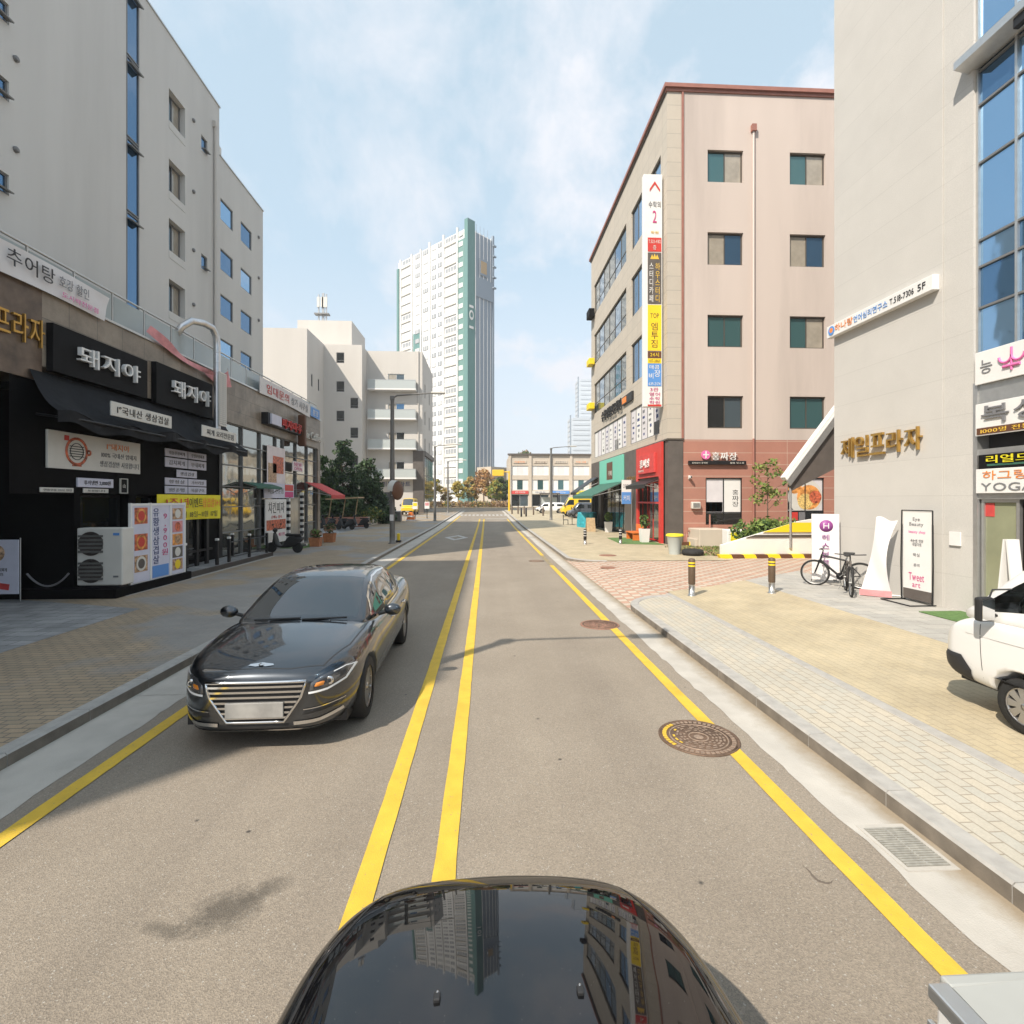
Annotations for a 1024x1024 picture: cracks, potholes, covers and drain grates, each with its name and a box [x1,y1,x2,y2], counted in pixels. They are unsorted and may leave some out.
manhole cover [580,620,620,630]
drain grate [856,824,961,872]
manhole cover [658,720,741,757]
crack [803,866,833,884]
